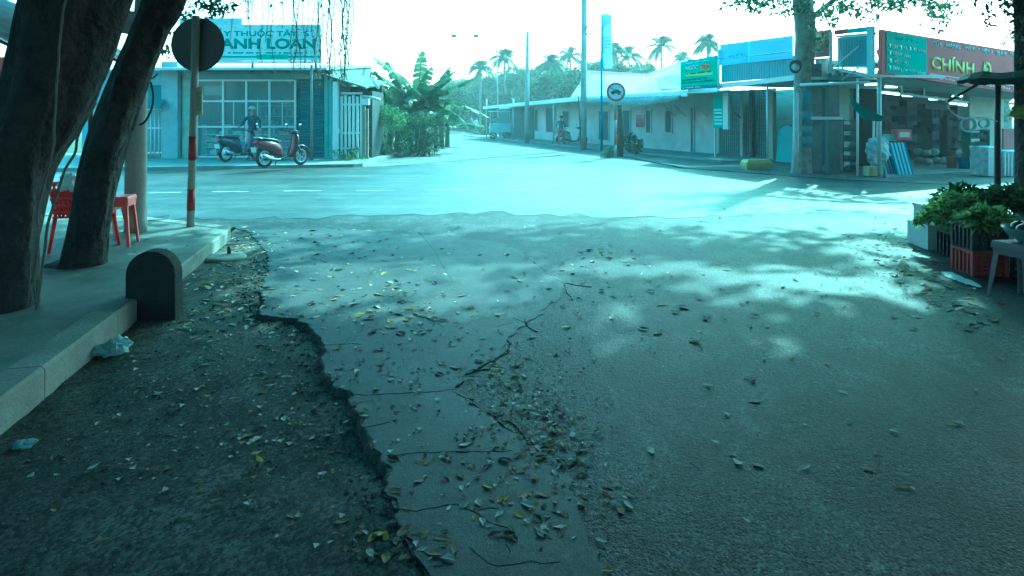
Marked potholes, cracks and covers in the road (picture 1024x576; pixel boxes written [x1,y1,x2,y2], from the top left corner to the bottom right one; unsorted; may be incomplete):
crack [383,504,556,566]
crack [352,319,538,458]
